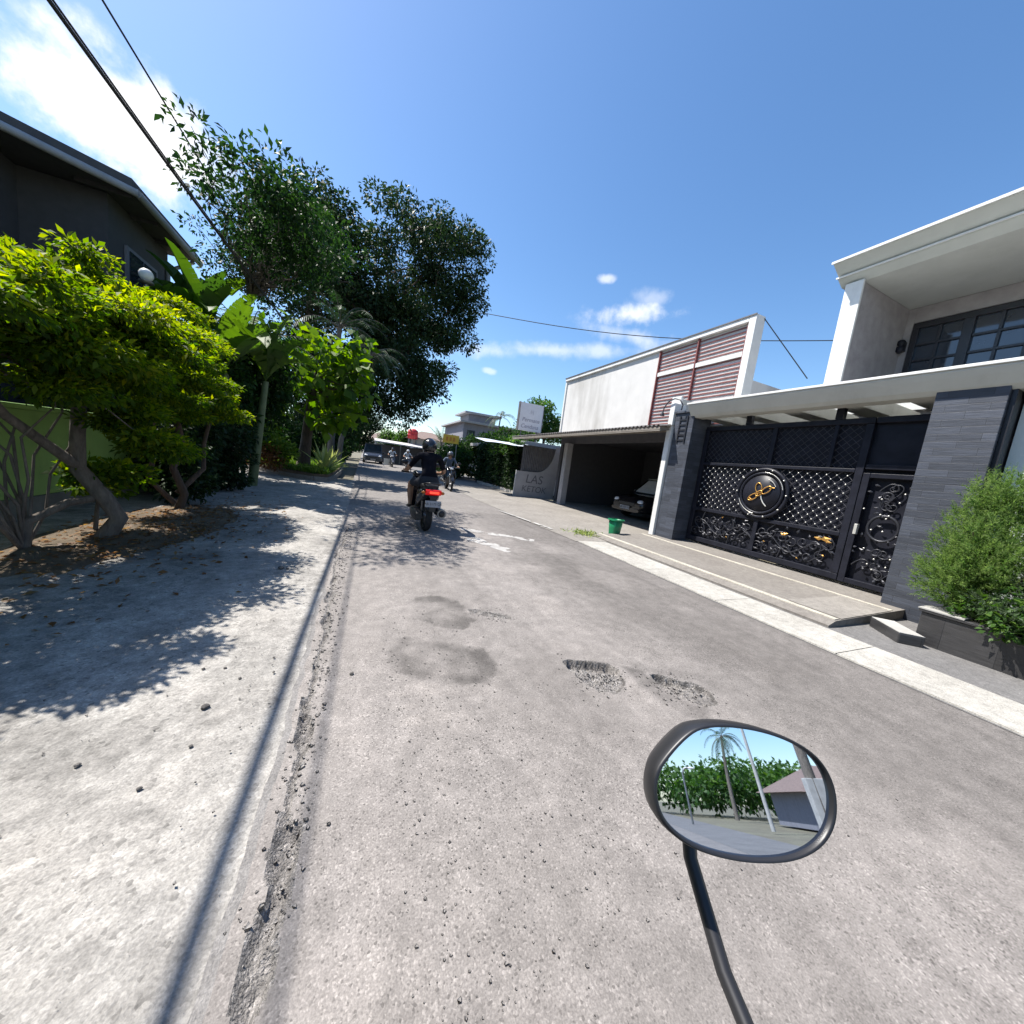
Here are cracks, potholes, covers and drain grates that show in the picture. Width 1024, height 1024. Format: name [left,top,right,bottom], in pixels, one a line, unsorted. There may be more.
pothole [562,659,626,694]
pothole [468,609,512,620]
pothole [648,674,719,708]
crack [226,526,349,1024]
